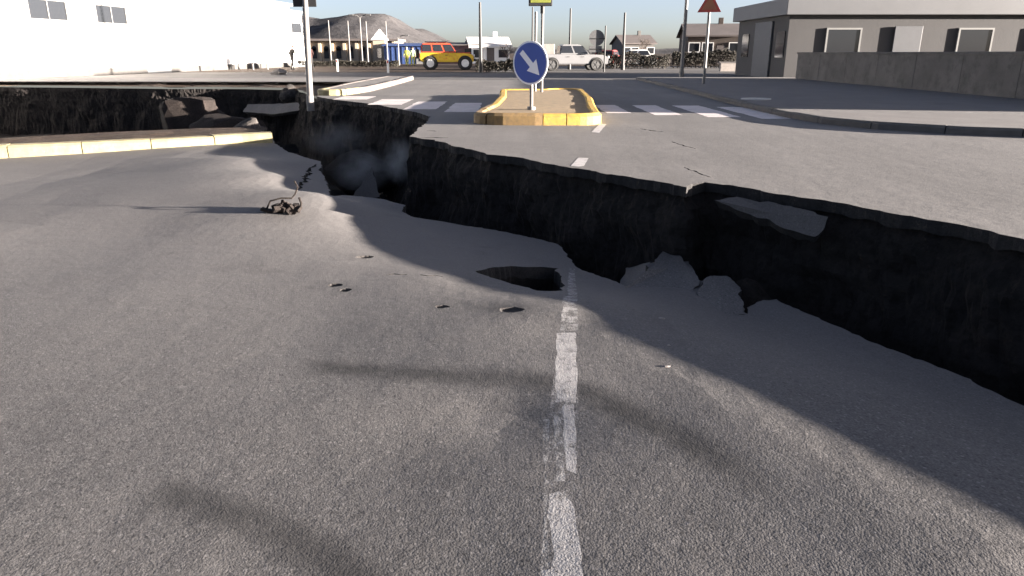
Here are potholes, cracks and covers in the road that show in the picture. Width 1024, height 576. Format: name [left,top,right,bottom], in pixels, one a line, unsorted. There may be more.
crack [0,87,1024,406]
